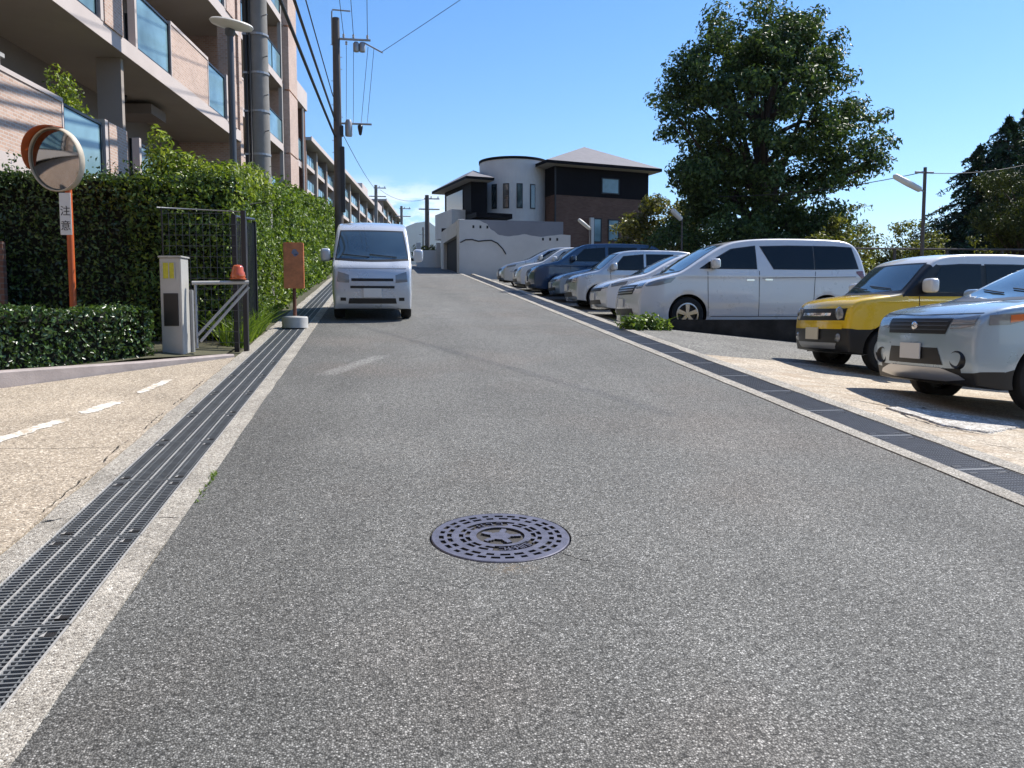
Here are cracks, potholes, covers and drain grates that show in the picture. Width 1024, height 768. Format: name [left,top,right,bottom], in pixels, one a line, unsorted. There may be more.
drain grate [873,435,1002,470]
drain grate [0,625,70,712]
drain grate [760,391,843,411]
drain grate [52,479,185,539]
drain grate [689,363,747,376]
drain grate [722,375,790,391]
manhole cover [429,514,571,563]
drain grate [0,535,141,629]
drain grate [113,441,216,482]
drain grate [185,393,254,415]
drain grate [254,343,294,352]
drain grate [959,468,1024,496]
